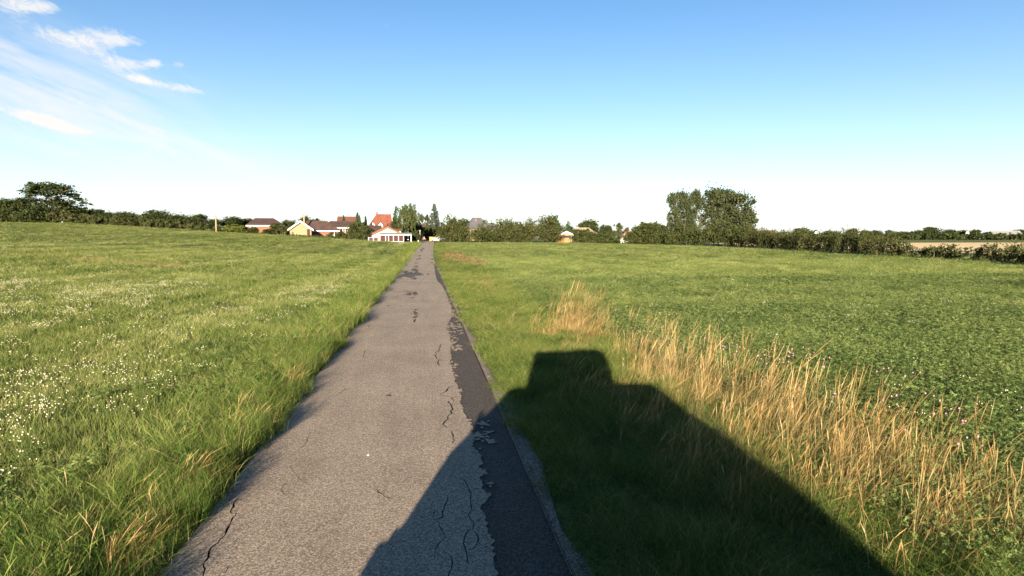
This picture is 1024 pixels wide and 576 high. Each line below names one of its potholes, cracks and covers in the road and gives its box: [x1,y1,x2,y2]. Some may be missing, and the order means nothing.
crack [429,478,488,576]
crack [202,496,239,576]
